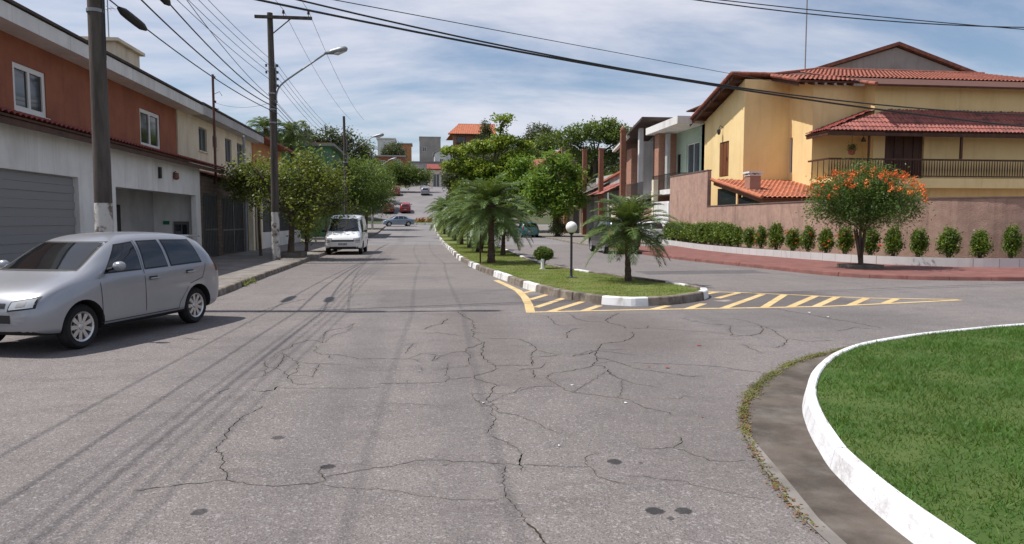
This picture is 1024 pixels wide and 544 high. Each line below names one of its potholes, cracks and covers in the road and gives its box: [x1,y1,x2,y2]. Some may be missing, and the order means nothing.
crack [138,406,623,544]
crack [244,308,875,432]
